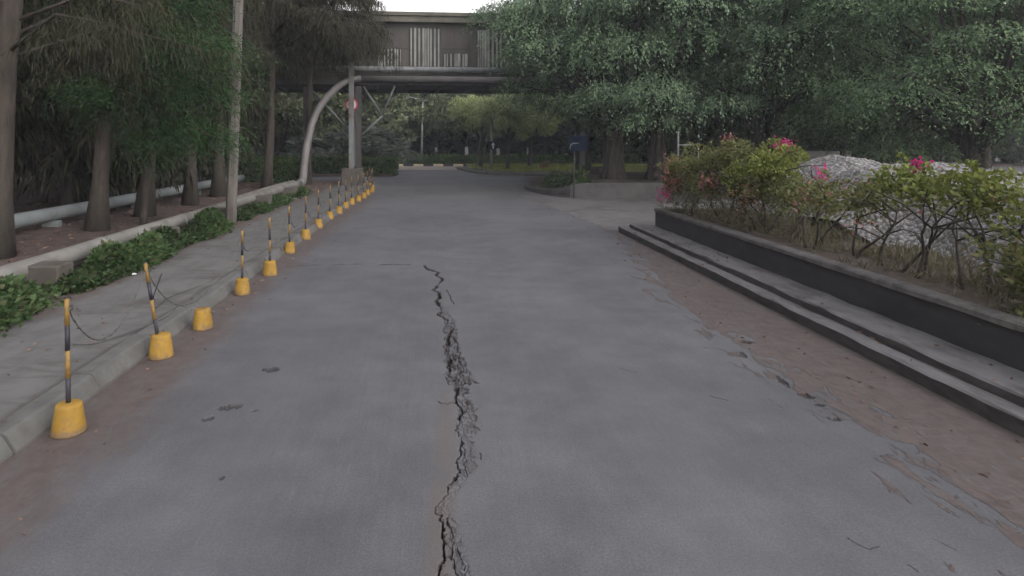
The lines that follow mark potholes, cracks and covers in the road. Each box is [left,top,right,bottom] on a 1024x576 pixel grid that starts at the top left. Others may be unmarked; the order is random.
pothole [192,414,223,424]
crack [705,394,733,403]
pothole [205,401,252,413]
pothole [254,365,286,374]
crack [281,263,489,576]
